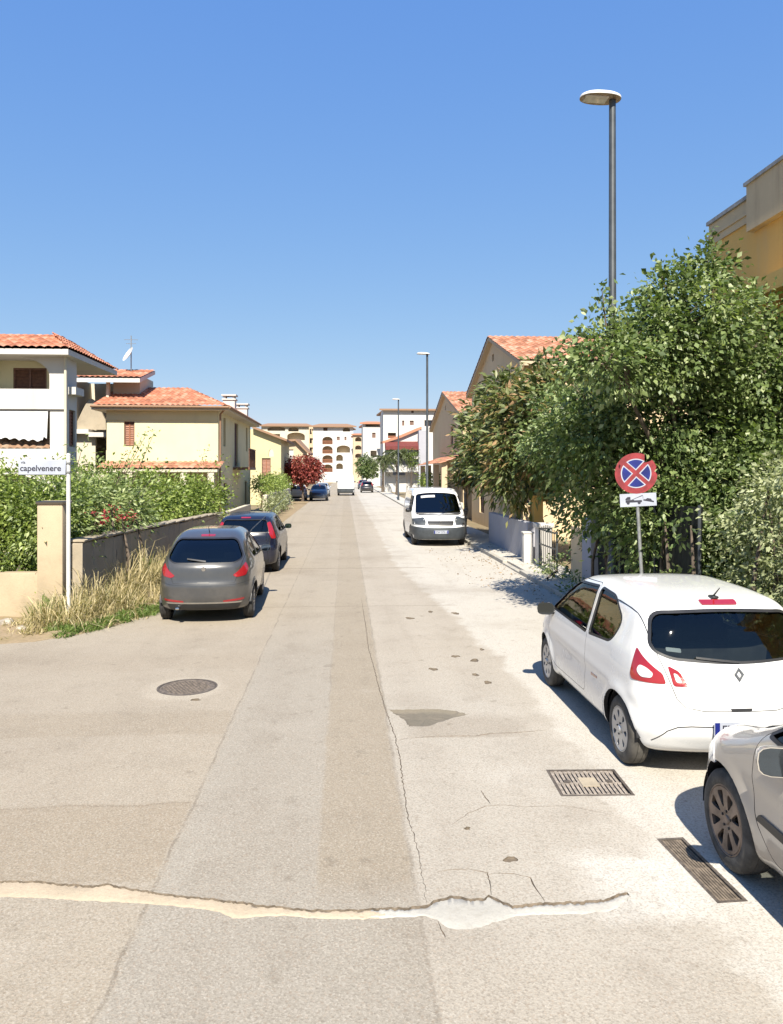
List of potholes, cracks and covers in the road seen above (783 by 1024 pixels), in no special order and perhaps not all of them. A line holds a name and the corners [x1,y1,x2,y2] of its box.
crack [0,599,630,937]
drain grate [546,769,635,796]
manhole cover [156,679,218,696]
drain grate [657,837,748,903]
